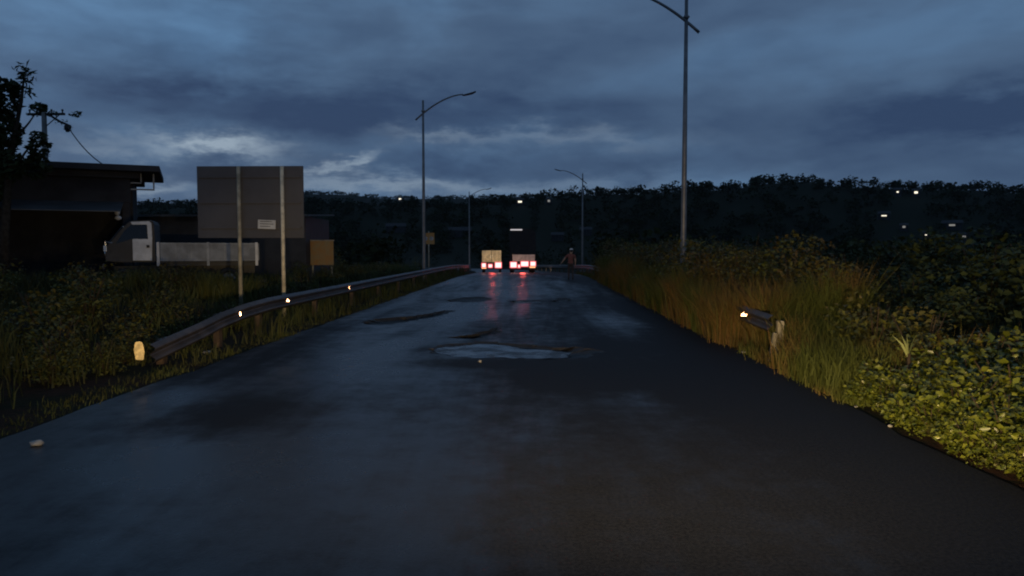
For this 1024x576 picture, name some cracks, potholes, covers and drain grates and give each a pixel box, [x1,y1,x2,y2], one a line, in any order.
pothole [451,327,501,339]
pothole [426,342,604,360]
pothole [361,310,454,325]
